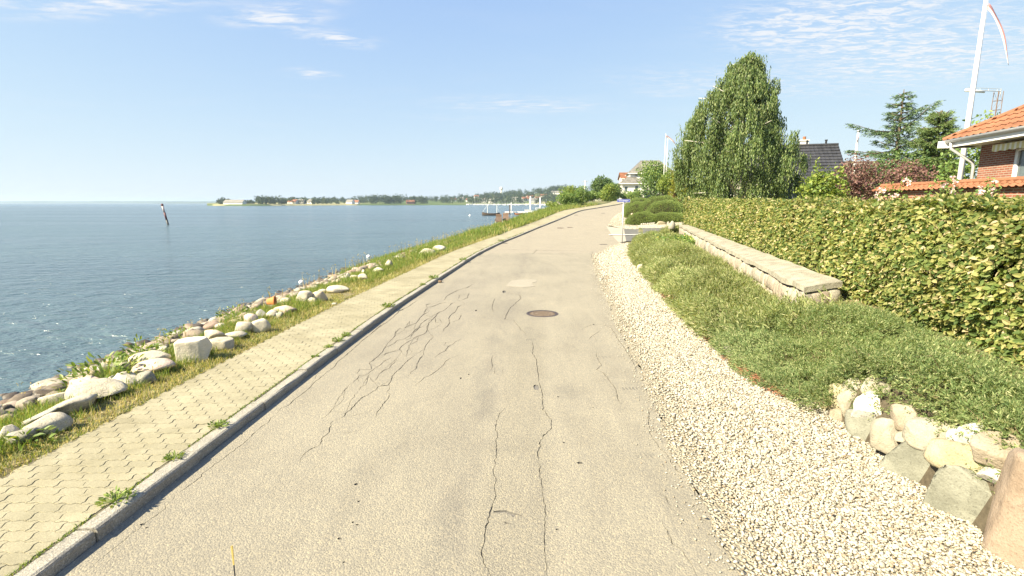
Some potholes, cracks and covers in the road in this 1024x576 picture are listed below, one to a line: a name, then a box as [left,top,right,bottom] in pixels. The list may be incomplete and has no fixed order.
crack [481,413,500,576]
crack [590,326,636,401]
crack [98,287,469,561]
crack [492,293,552,570]
